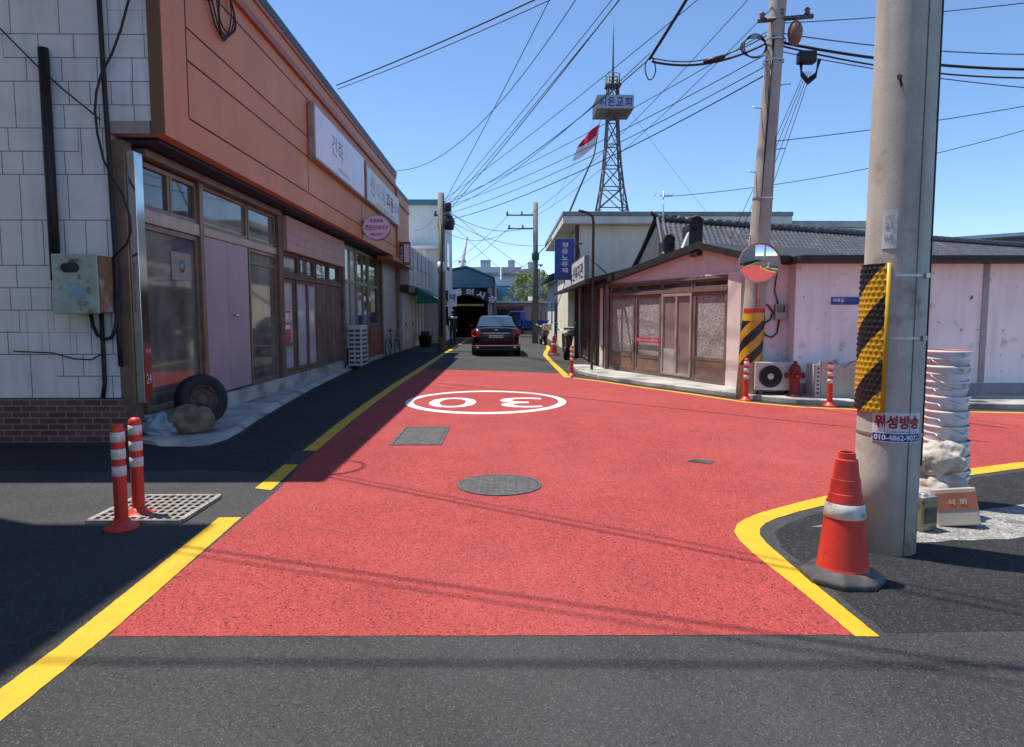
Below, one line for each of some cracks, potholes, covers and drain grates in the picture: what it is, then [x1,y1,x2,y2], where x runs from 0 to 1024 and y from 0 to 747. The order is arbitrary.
manhole cover [457,474,542,496]
drain grate [85,494,222,524]
manhole cover [389,426,450,445]
